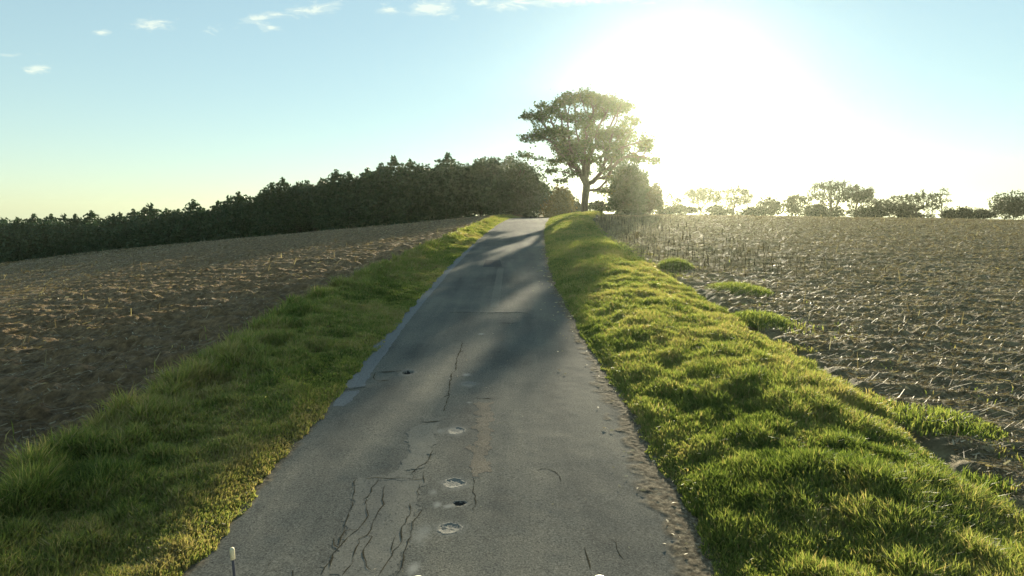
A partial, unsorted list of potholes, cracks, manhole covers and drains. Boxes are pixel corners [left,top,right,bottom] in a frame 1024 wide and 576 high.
crack [322,450,433,574]
pothole [441,477,467,488]
pothole [437,522,463,534]
